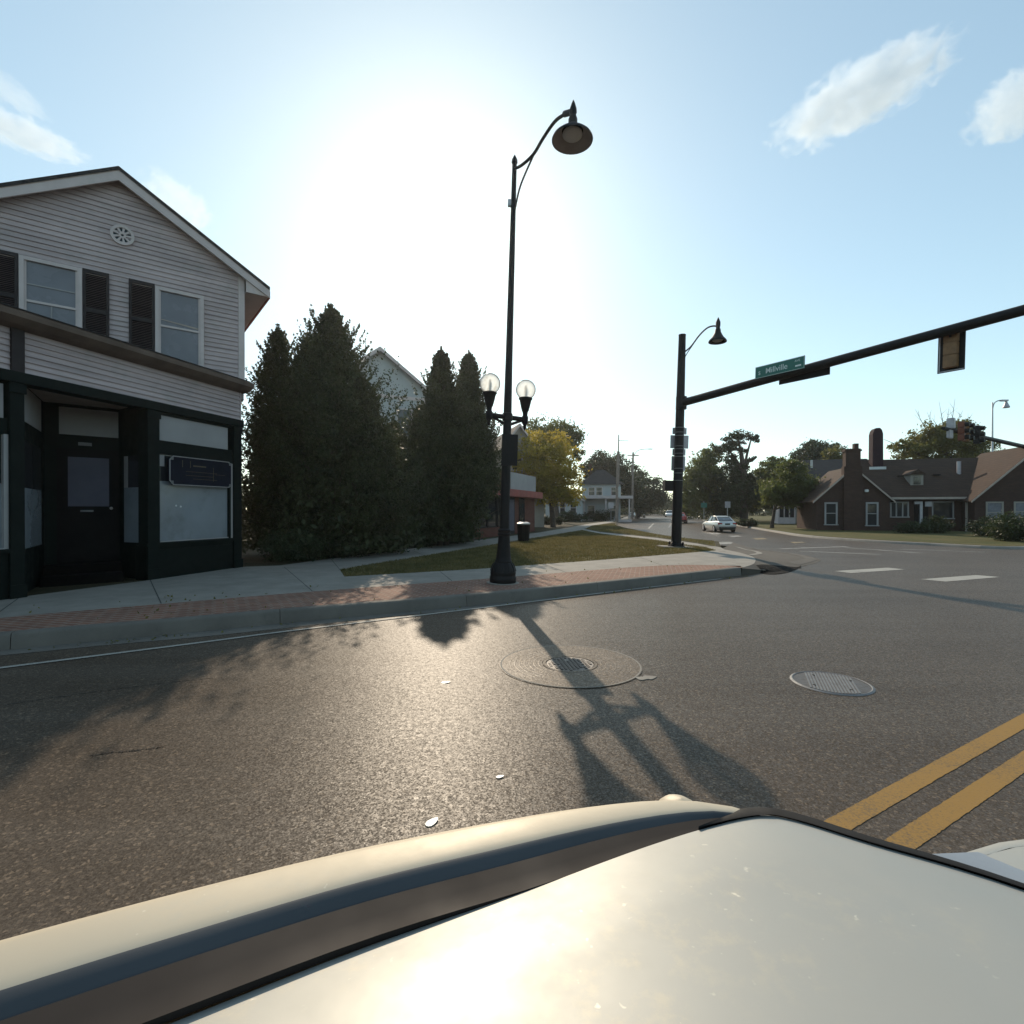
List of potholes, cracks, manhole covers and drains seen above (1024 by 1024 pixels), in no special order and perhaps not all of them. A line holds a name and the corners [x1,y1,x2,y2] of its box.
crack [90,746,164,756]
manhole cover [499,645,643,688]
manhole cover [790,671,876,696]
